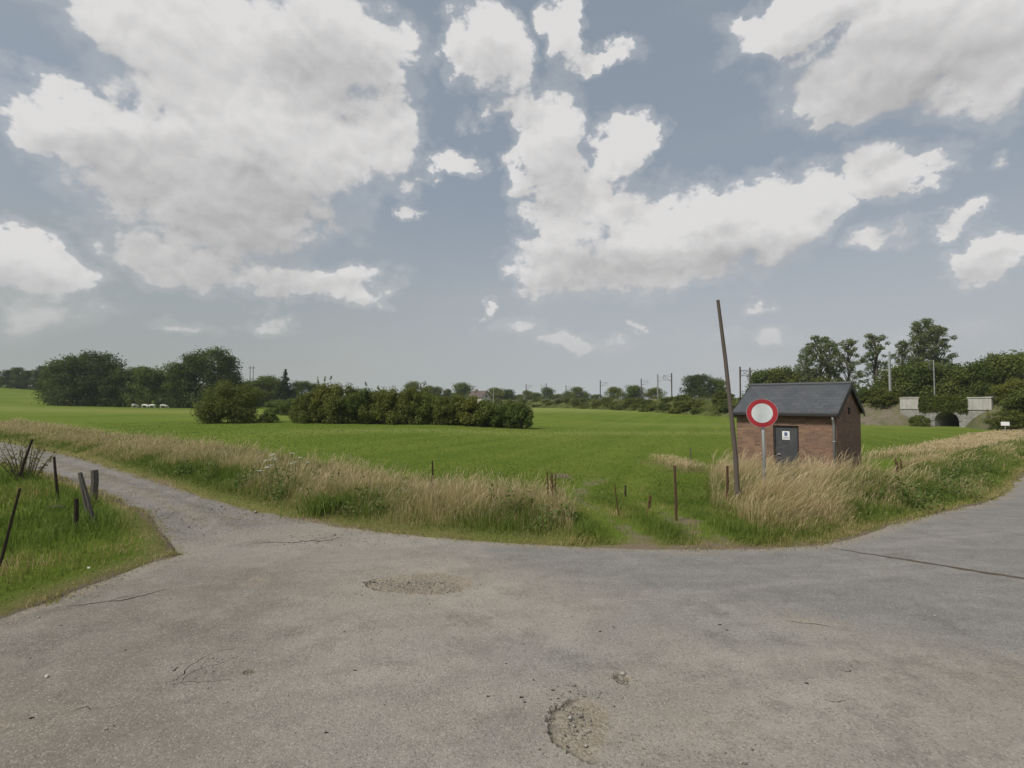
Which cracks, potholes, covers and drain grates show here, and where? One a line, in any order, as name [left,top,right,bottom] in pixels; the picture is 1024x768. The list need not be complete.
pothole [611,671,632,685]
crack [166,648,236,685]
pothole [545,696,620,766]
pothole [362,572,478,595]
crack [73,588,169,606]
